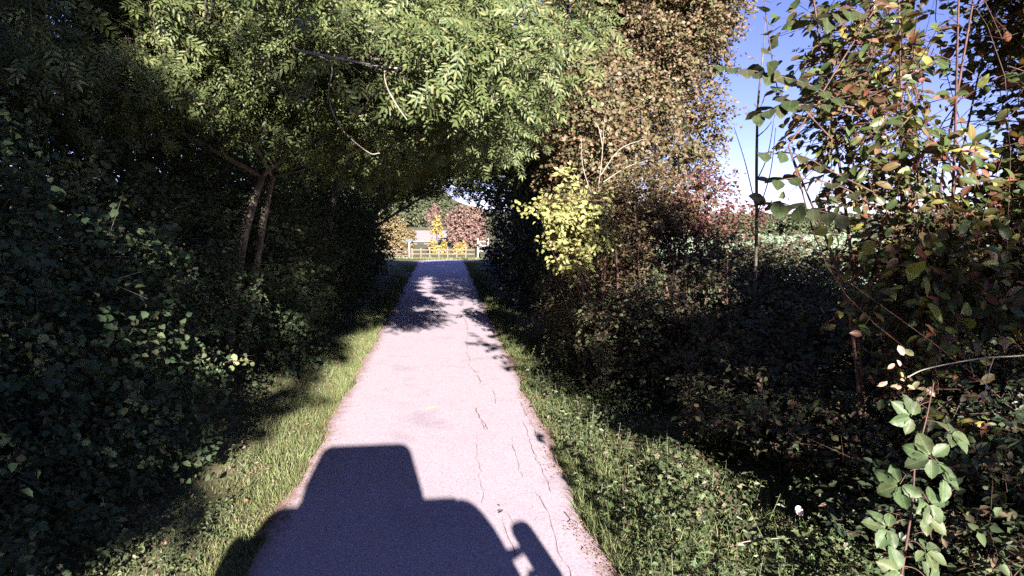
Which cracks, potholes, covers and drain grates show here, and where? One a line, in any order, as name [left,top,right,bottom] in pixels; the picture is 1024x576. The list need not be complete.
crack [448,314,496,502]
crack [512,402,571,576]
